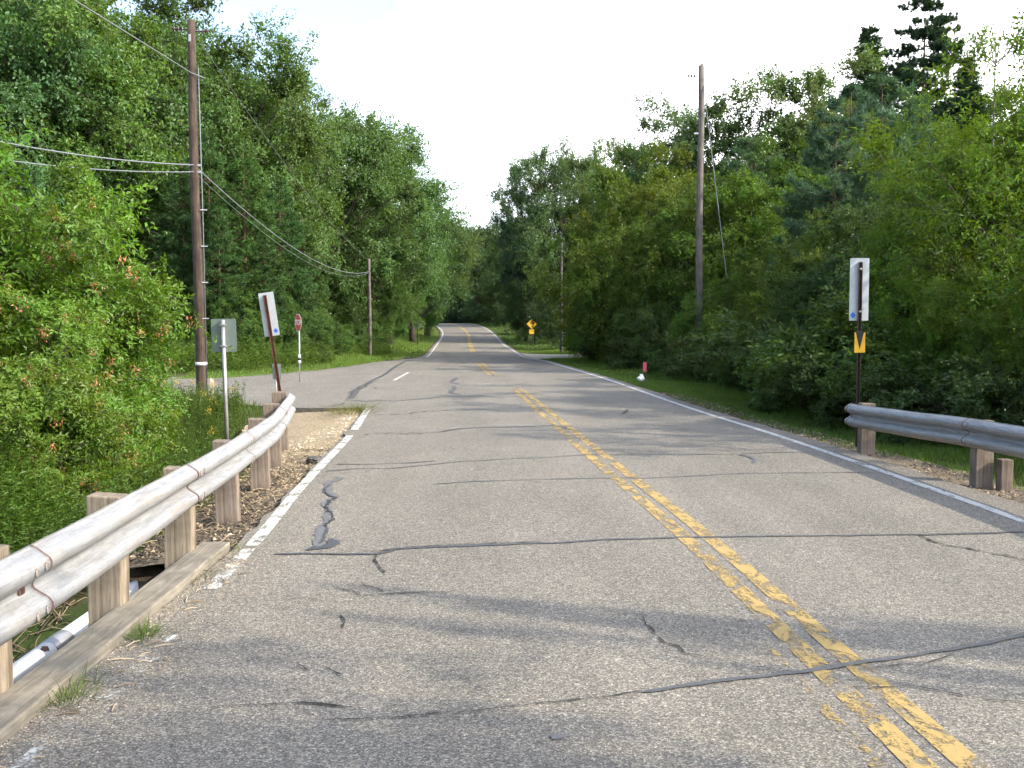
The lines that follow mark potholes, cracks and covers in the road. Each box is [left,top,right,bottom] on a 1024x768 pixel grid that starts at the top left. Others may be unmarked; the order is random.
crack [643,616,702,656]
